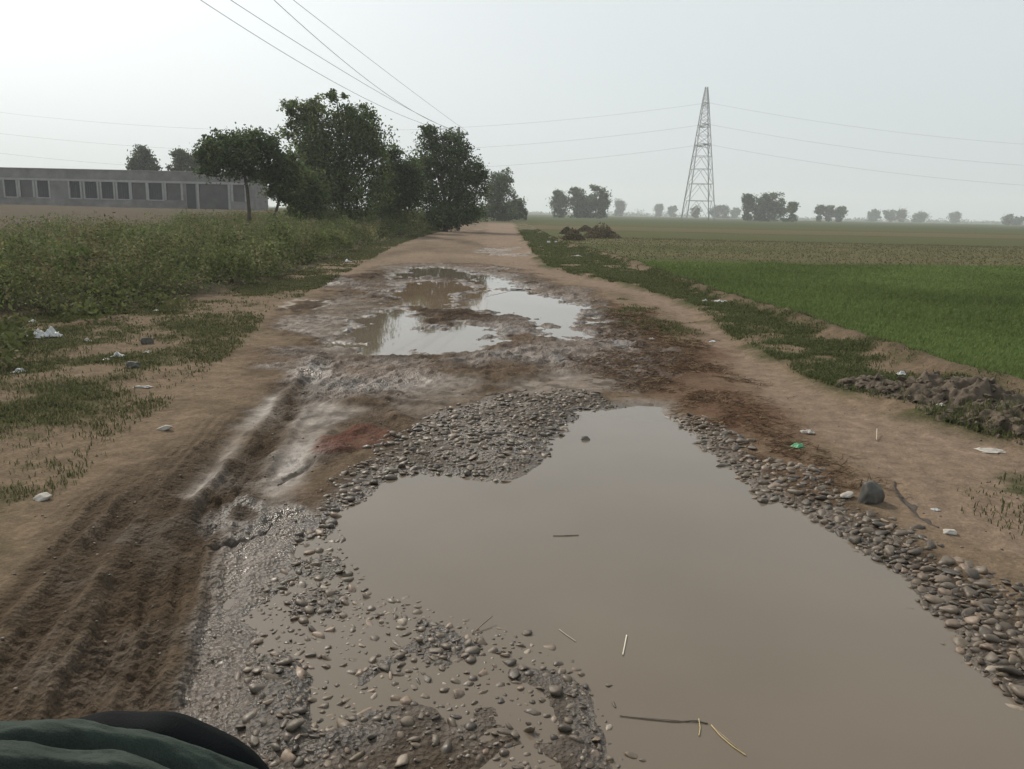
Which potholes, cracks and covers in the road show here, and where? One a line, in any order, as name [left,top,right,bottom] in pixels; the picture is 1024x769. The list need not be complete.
pothole [223,396,1024,769]
pothole [381,265,547,290]
pothole [303,306,520,358]
pothole [371,278,510,312]
pothole [459,288,621,341]
